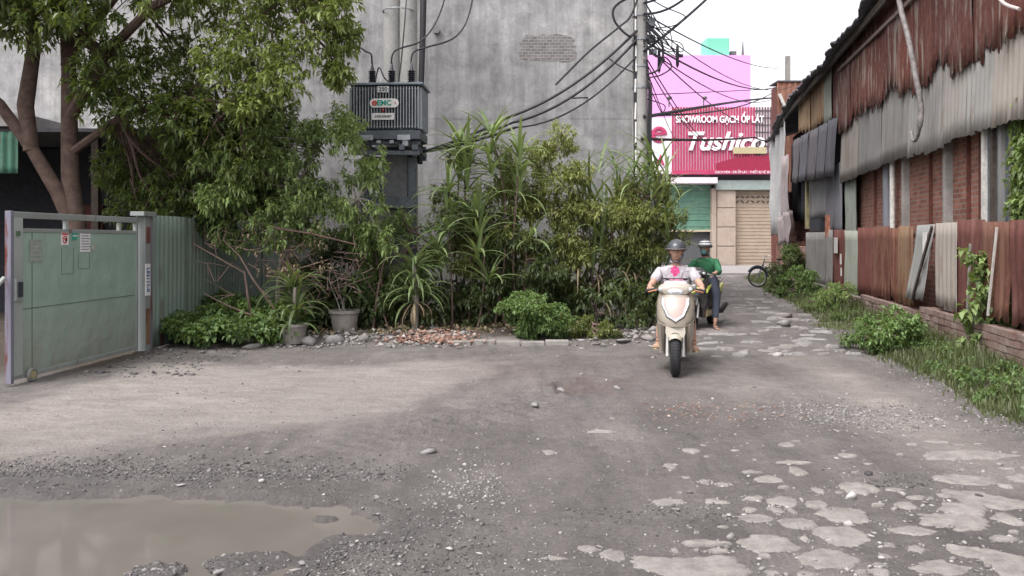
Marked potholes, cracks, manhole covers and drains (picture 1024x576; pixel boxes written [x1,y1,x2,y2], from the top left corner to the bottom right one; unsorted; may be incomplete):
pothole [0,481,414,576]
pothole [541,376,633,398]
